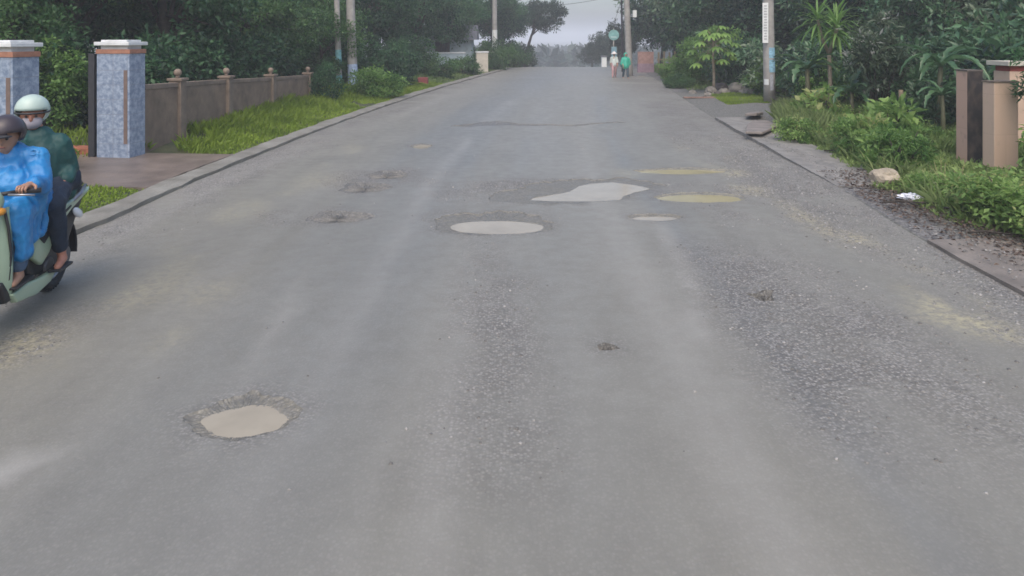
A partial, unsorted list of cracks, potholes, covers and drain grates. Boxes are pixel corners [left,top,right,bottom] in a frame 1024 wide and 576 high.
pothole [746,290,774,301]
pothole [306,211,375,224]
pothole [183,390,303,442]
pothole [364,170,408,179]
pothole [339,182,393,193]
